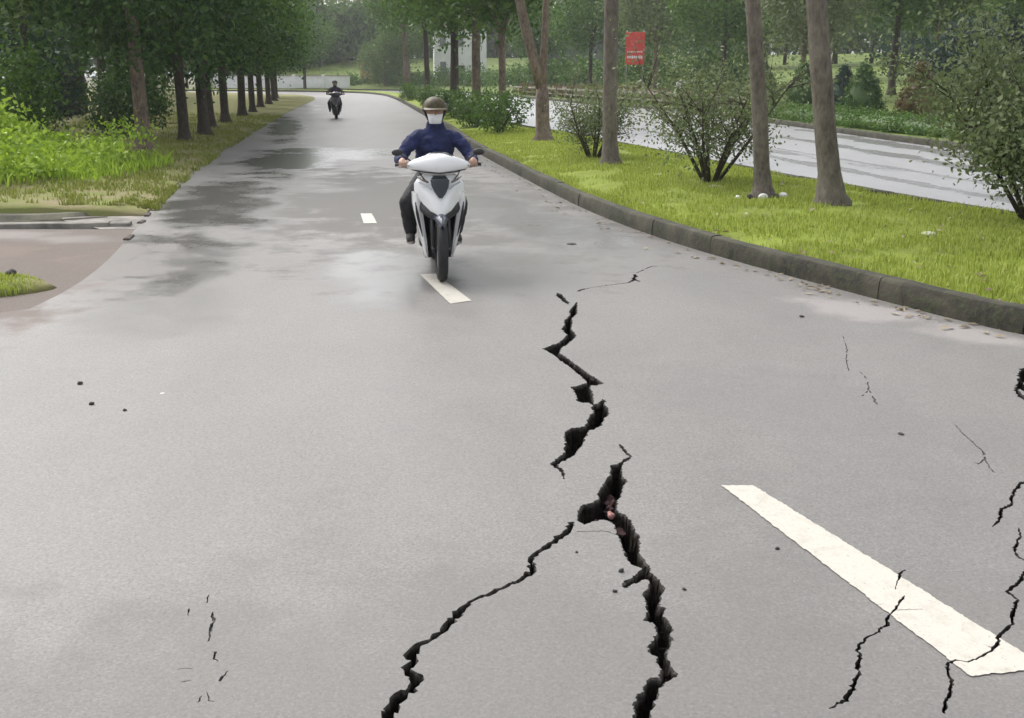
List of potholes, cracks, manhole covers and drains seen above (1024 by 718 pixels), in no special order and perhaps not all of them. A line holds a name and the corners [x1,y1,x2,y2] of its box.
crack [1013,368,1024,400]
crack [829,570,906,709]
crack [181,594,229,703]
crack [381,266,678,718]
crack [942,424,1024,714]
crack [843,337,878,405]
